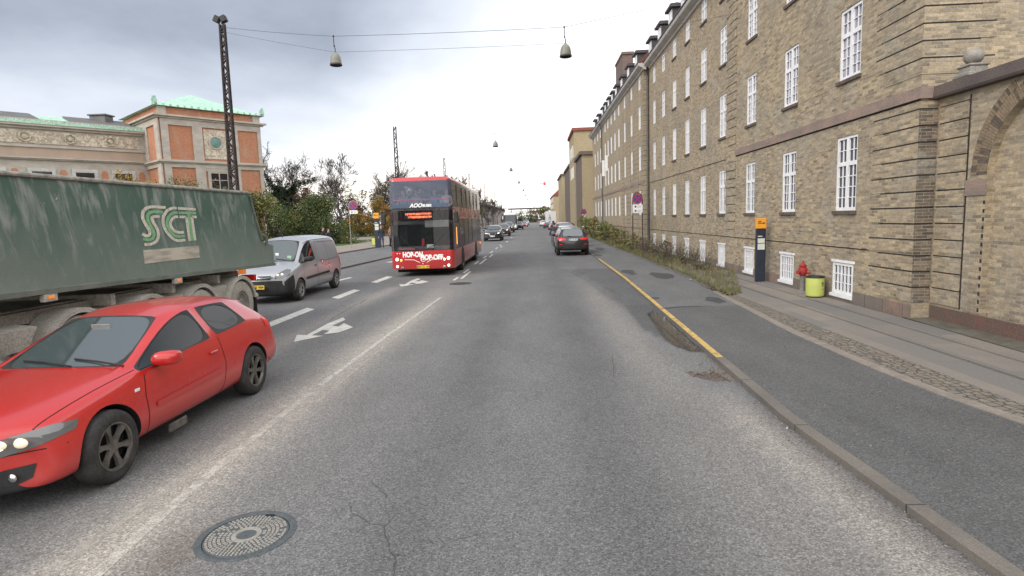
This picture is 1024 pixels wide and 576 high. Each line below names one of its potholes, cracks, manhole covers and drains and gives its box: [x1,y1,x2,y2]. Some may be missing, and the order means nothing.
manhole cover [193,511,297,562]
crack [350,505,400,576]
pothole [685,366,733,382]
